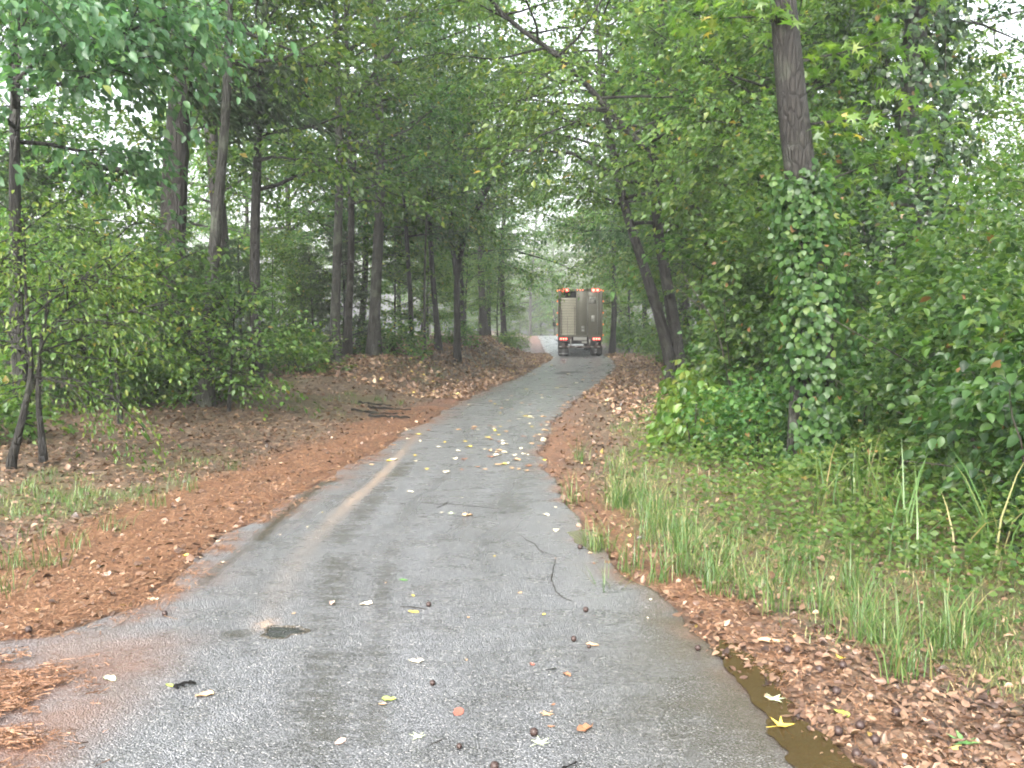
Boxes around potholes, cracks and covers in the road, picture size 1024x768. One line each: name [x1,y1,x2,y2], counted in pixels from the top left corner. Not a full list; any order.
crack [522,536,572,601]
pothole [260,625,311,639]
